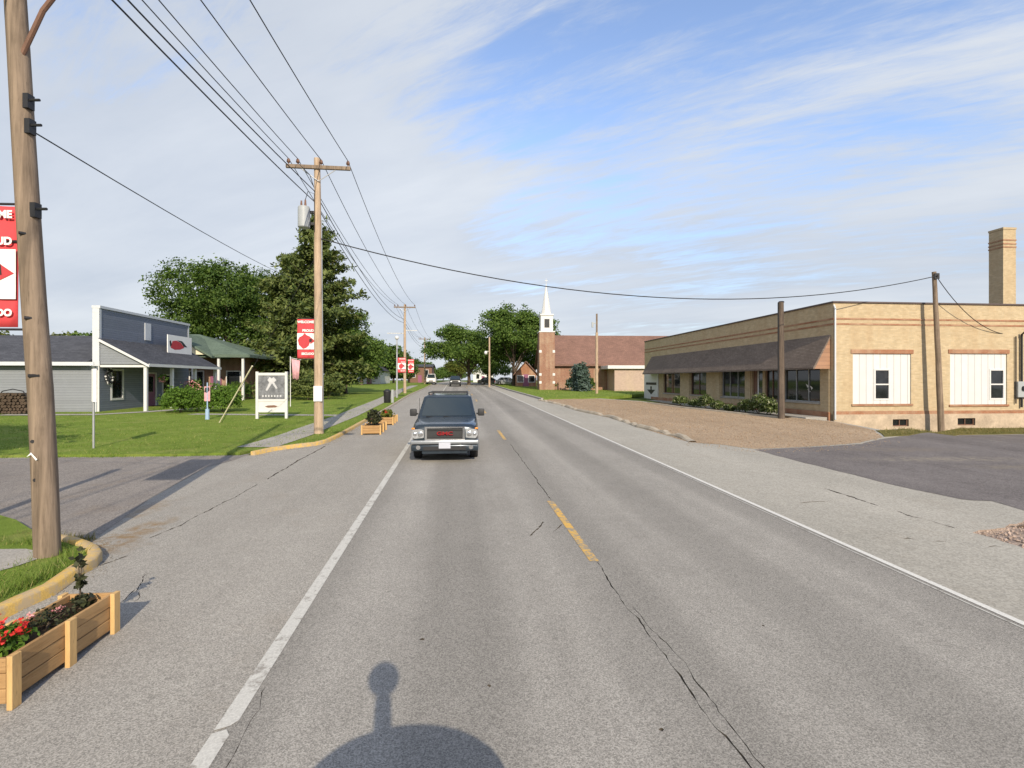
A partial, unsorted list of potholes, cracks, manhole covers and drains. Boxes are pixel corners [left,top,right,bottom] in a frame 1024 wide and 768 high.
crack [803,488,954,542]
crack [226,688,265,768]
crack [100,555,150,601]
crack [598,563,765,768]
